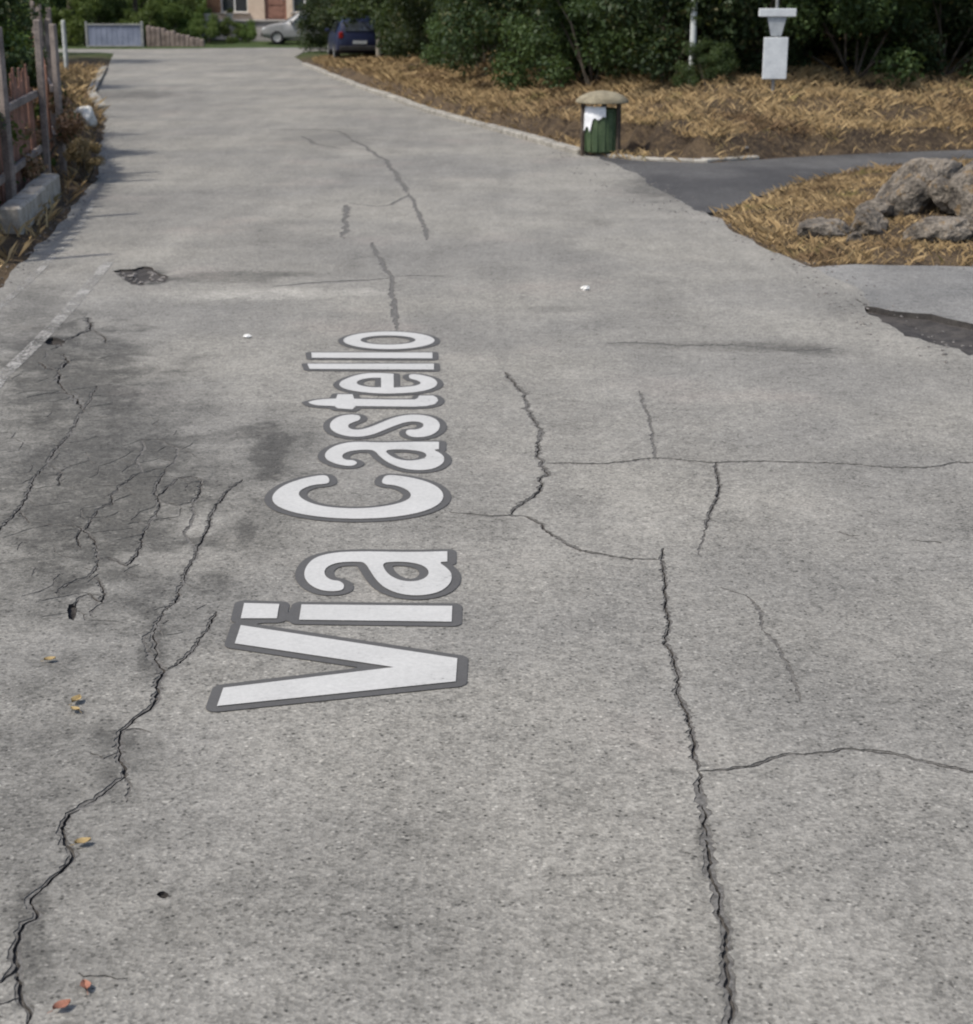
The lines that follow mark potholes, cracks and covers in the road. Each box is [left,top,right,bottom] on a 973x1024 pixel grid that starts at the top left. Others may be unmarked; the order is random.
crack [450,372,973,1024]
crack [273,129,444,331]
crack [0,313,243,1024]
pothole [113,266,169,286]
